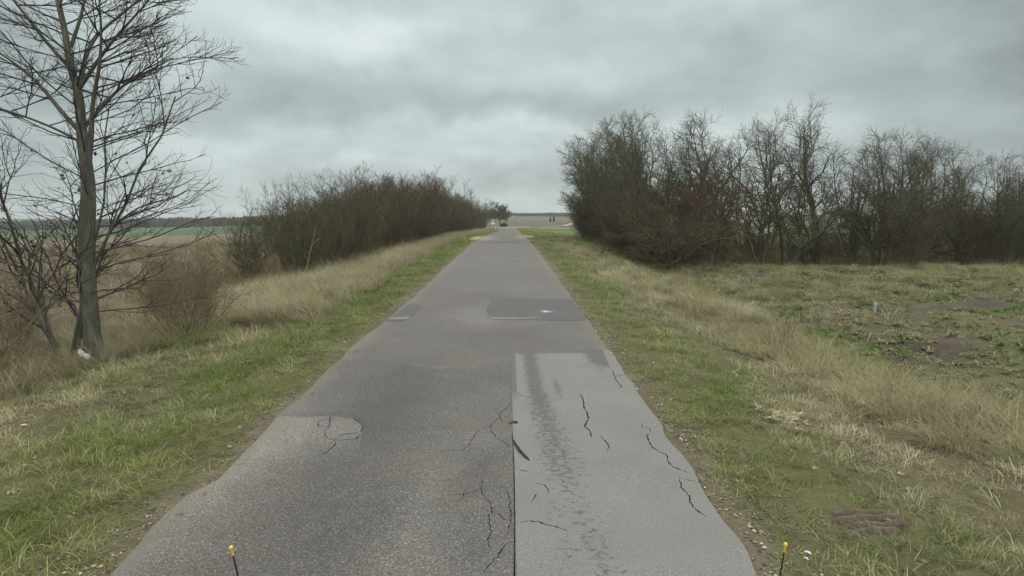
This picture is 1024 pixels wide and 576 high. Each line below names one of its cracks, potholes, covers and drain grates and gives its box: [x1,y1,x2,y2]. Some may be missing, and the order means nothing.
crack [317,416,367,456]
crack [580,395,610,450]
crack [444,391,567,576]
crack [642,426,707,517]
